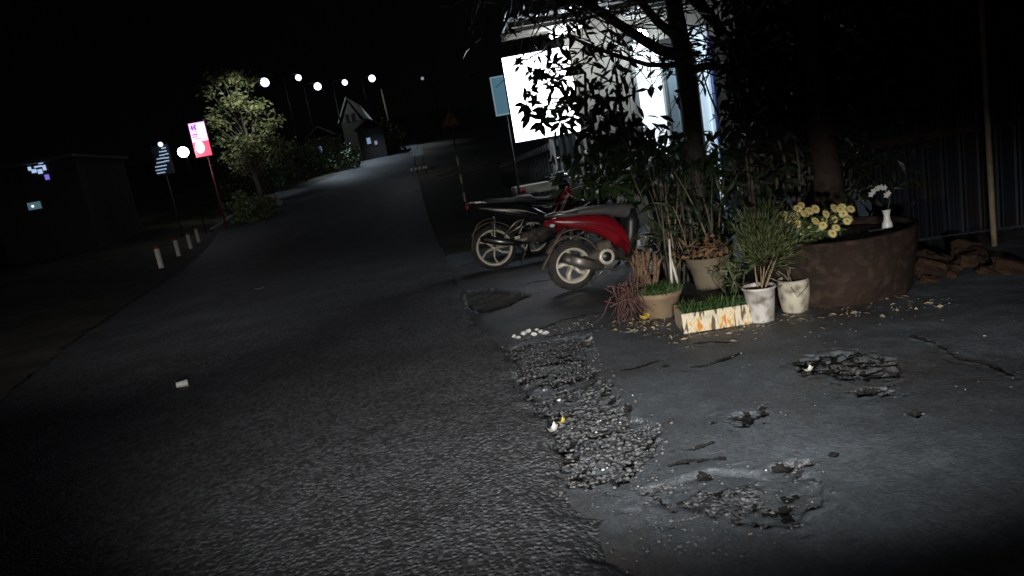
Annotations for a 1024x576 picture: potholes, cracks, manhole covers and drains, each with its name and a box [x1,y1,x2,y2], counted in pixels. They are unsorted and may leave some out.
pothole [610,447,860,554]
crack [773,334,1024,389]
pothole [459,286,537,317]
